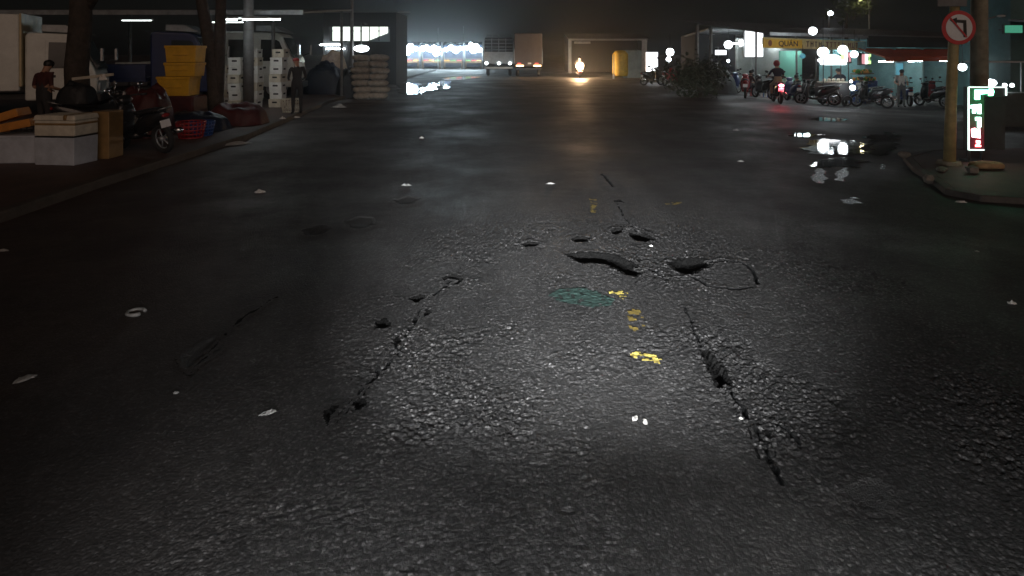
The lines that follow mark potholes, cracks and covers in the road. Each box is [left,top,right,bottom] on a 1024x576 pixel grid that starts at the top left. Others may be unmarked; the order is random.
pothole [369,315,397,332]
pothole [559,250,649,279]
pothole [565,234,596,244]
crack [633,258,765,351]
crack [593,172,644,235]
pothole [623,227,661,244]
crack [328,279,458,426]
pothole [662,255,720,277]
pothole [517,239,546,248]
crack [723,384,807,491]
crack [185,294,283,375]
